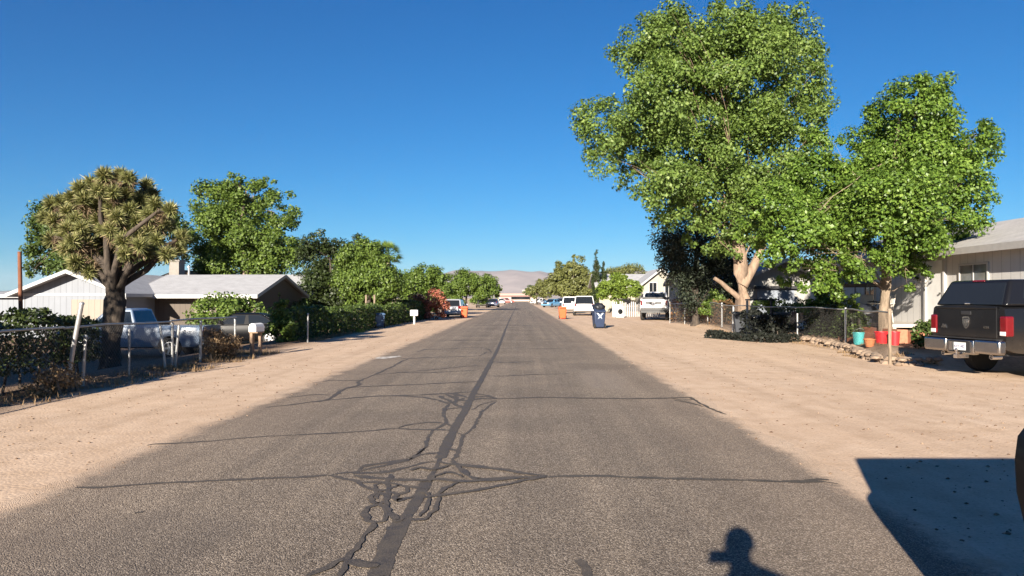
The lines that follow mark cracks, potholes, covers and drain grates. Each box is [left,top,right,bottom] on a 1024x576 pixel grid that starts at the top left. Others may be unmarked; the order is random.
crack [149,325,725,445]
